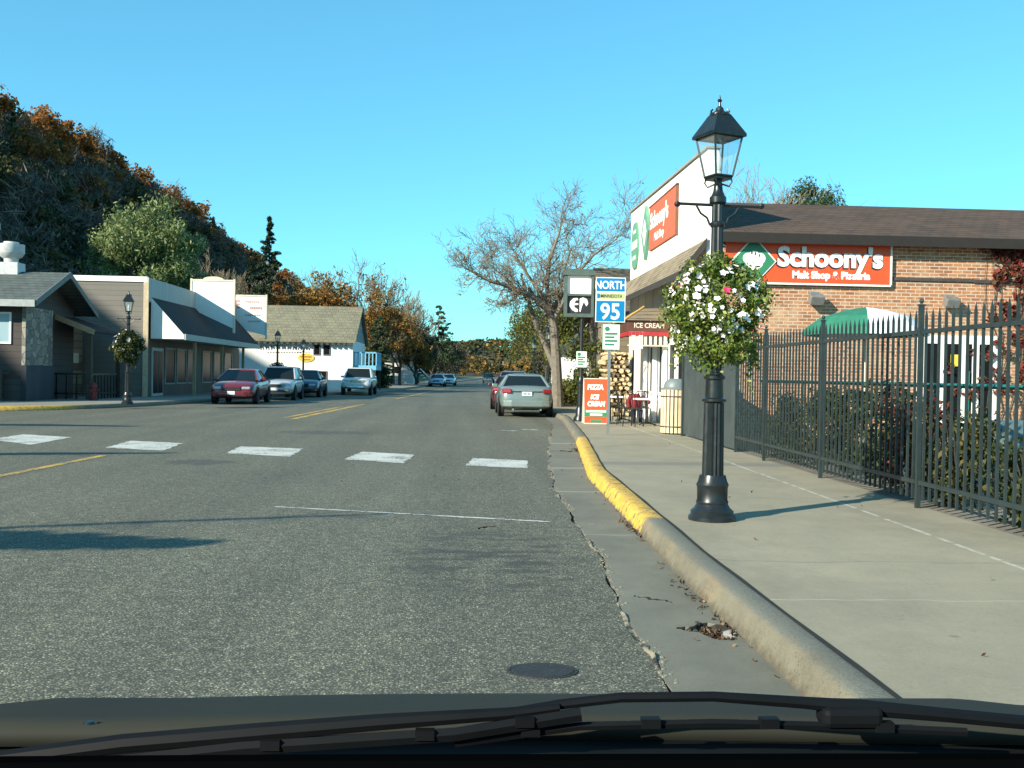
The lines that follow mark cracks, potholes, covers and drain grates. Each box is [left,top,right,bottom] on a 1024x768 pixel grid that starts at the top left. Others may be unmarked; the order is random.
crack [546,424,672,692]
manhole cover [506,663,579,679]
